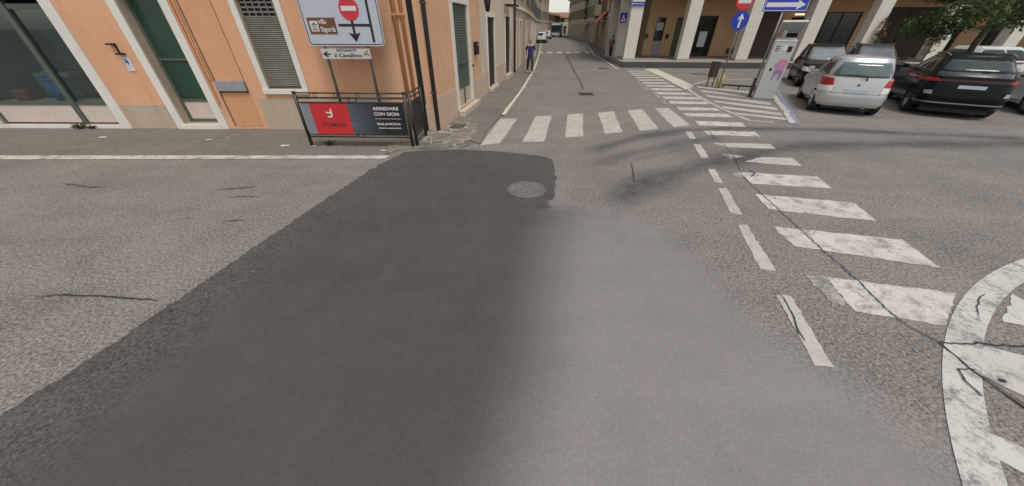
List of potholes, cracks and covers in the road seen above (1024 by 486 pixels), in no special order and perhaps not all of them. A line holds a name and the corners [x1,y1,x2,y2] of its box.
manhole cover [506,181,547,199]
